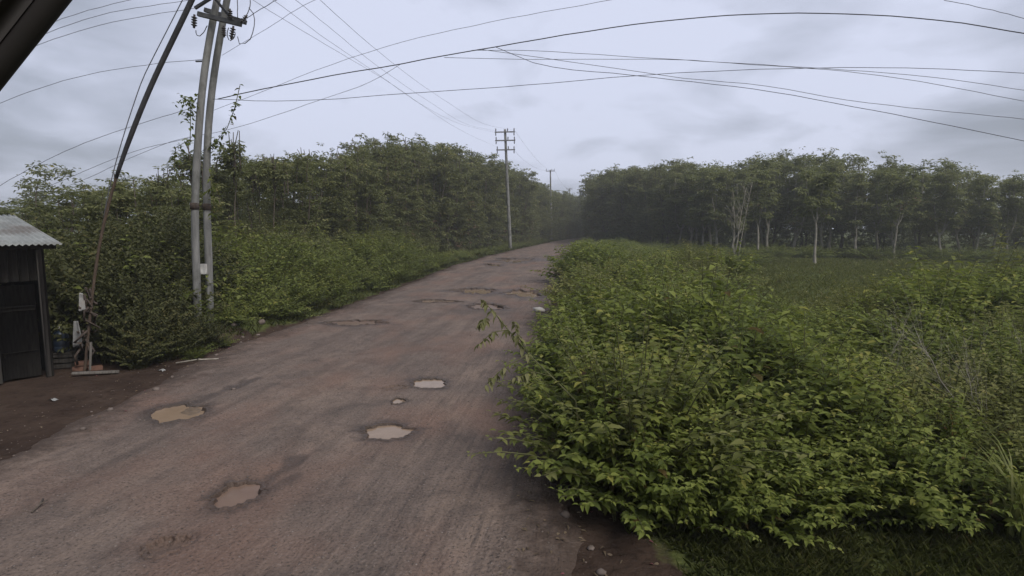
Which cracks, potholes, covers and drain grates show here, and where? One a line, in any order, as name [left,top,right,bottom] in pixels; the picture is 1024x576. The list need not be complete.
pothole [498,288,546,299]
pothole [409,377,450,389]
pothole [138,532,199,561]
pothole [141,402,214,426]
pothole [464,303,511,311]
pothole [203,478,267,512]
pothole [318,319,390,327]
pothole [357,421,422,442]
